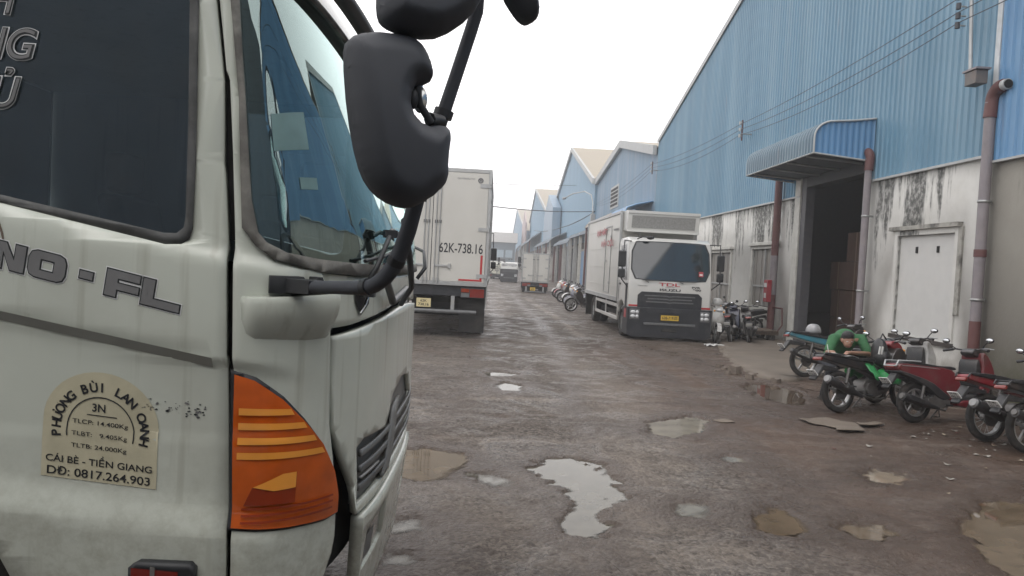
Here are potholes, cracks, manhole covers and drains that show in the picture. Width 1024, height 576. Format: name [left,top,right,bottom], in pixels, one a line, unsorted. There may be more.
pothole [391,514,439,536]
pothole [645,414,712,438]
pothole [402,445,474,482]
pothole [525,455,634,540]
pothole [742,383,809,405]
pothole [715,453,754,463]
pothole [495,381,525,391]
pothole [669,499,721,520]
pothole [463,470,522,488]
